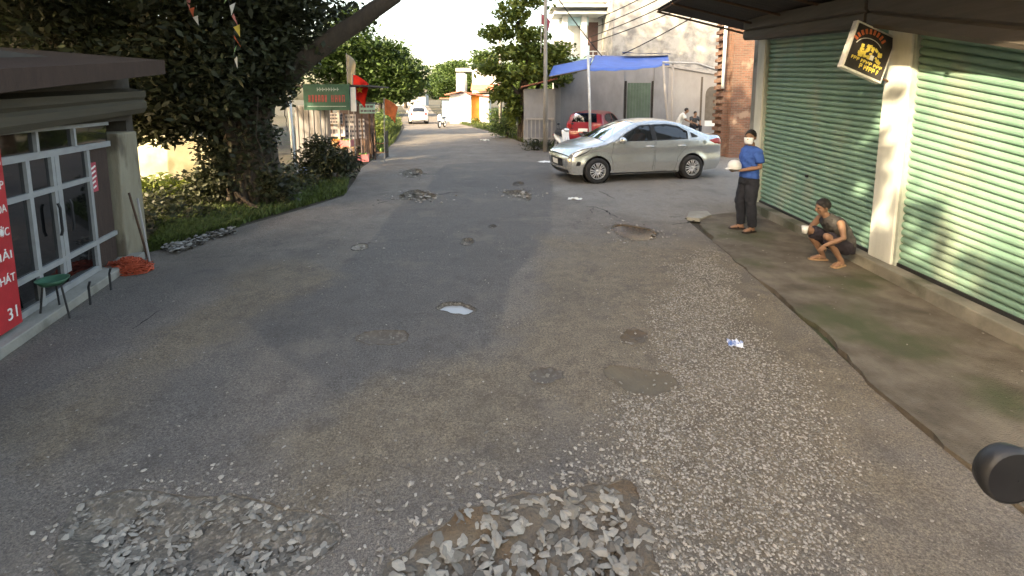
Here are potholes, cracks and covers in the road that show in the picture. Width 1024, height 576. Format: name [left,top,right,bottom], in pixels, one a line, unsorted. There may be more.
pothole [397,190,436,201]
pothole [47,489,343,576]
pothole [611,224,658,241]
pothole [435,301,477,315]
pothole [403,168,423,178]
pothole [380,479,663,576]
pothole [351,243,369,251]
pothole [504,190,531,201]
